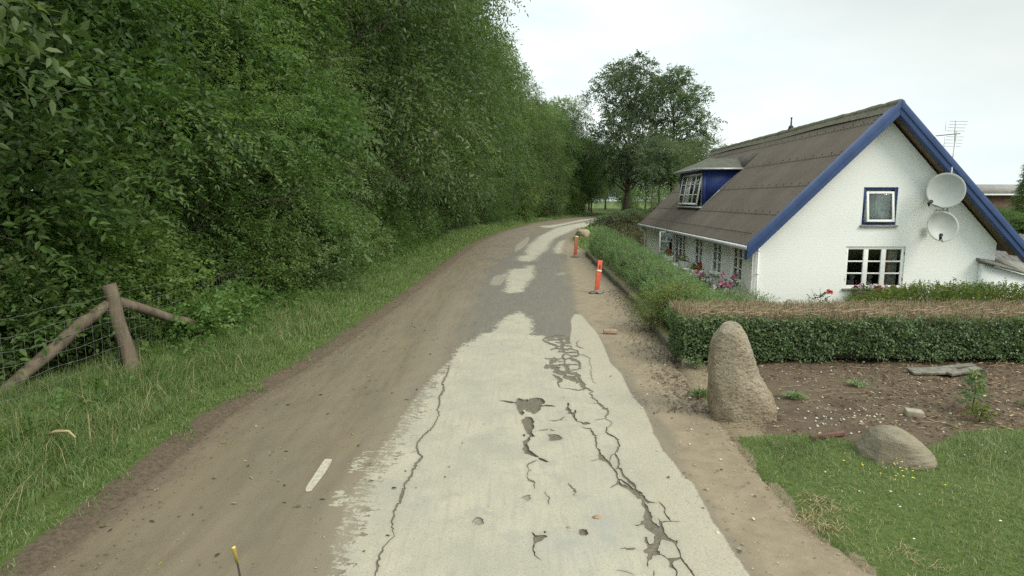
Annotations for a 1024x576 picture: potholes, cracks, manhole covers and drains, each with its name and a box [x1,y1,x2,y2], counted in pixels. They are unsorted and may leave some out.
pothole [532,531,547,560]
crack [542,335,695,576]
pothole [500,397,555,415]
crack [374,365,450,576]
pothole [522,417,548,462]
